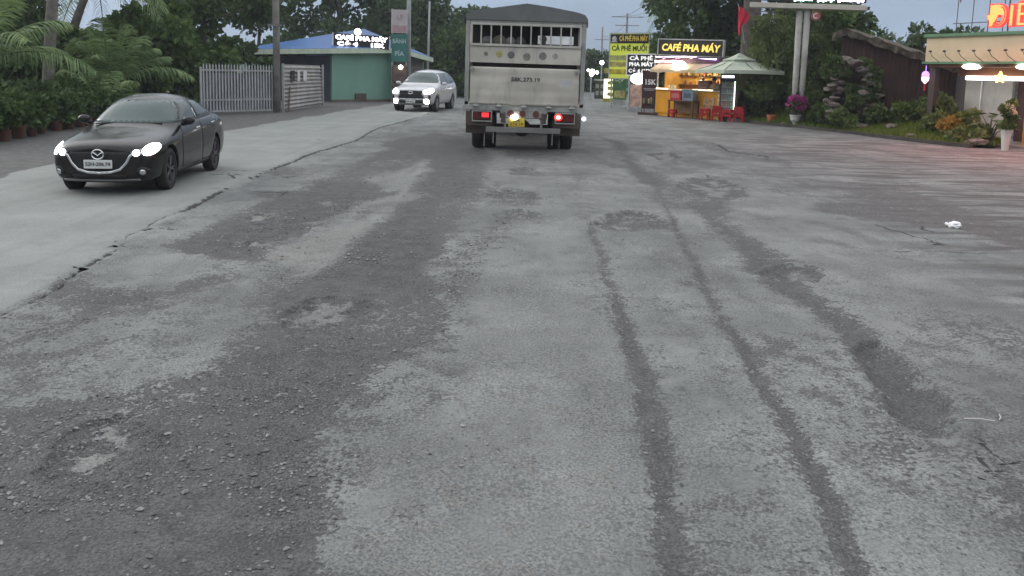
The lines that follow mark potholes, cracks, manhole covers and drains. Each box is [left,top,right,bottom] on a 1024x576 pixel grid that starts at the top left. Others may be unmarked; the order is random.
pothole [0,407,195,502]
crack [0,116,430,347]
crack [870,224,995,255]
crack [698,142,781,159]
pothole [568,206,697,235]
crack [885,429,1021,472]
pothole [256,292,385,335]
